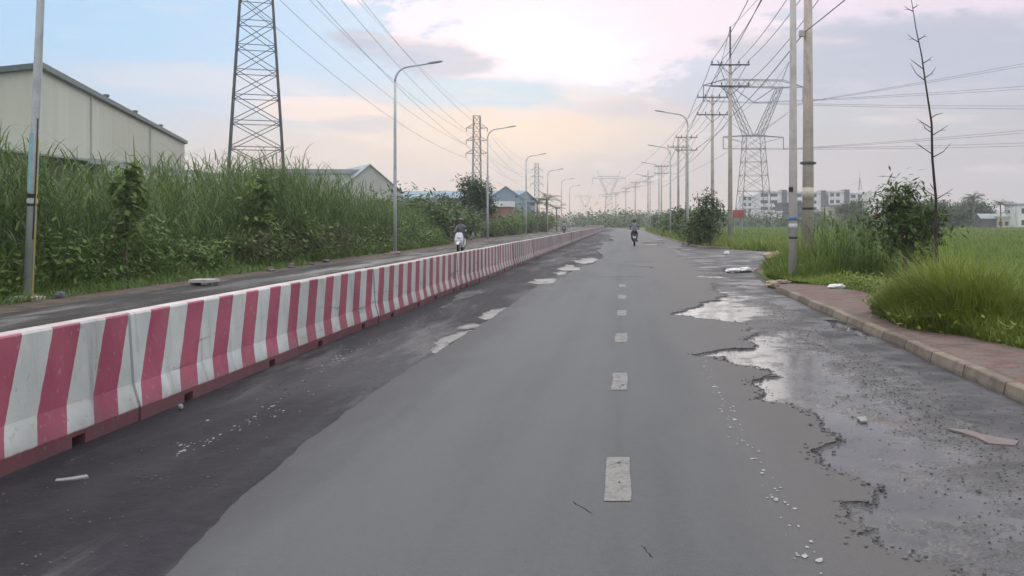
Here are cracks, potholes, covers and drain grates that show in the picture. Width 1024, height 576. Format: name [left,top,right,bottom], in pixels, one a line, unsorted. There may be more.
pothole [692,326,1024,576]
pothole [670,283,797,324]
